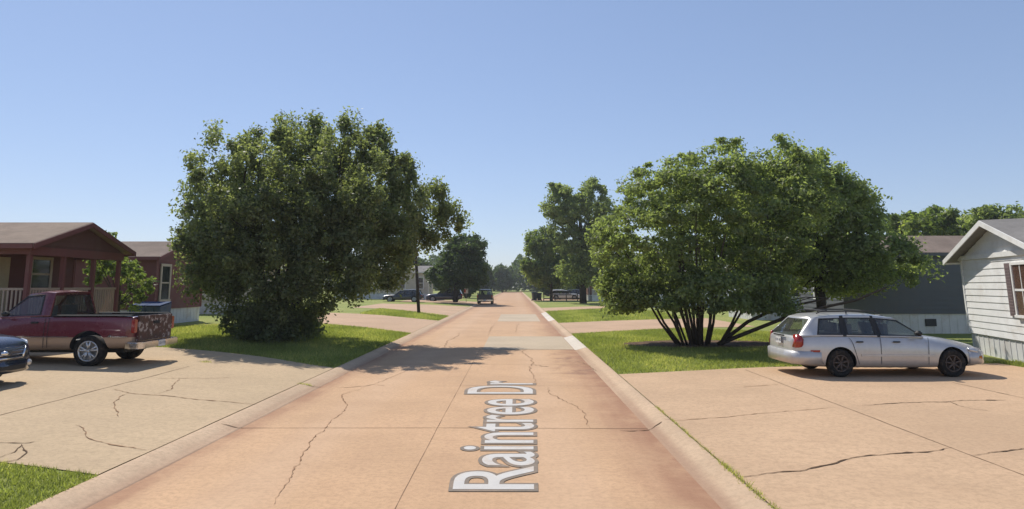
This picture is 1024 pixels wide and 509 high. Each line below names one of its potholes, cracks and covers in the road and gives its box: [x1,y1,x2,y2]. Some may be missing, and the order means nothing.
crack [274,371,405,504]
crack [1,441,34,462]
crack [113,377,249,415]
crack [732,447,950,477]
